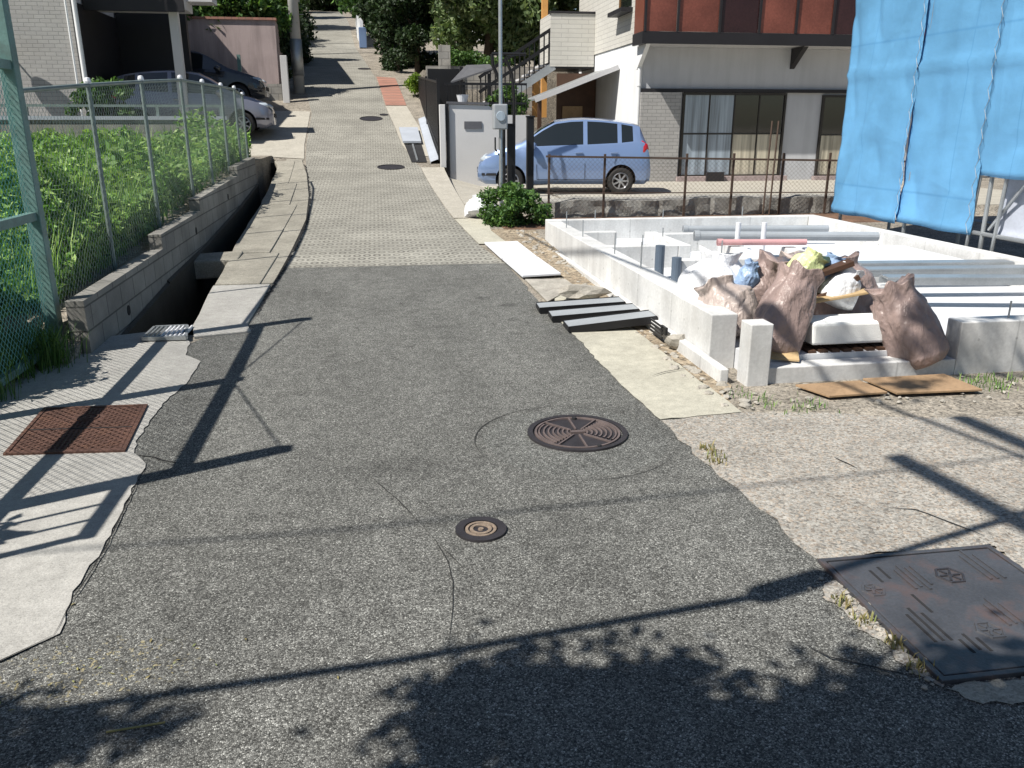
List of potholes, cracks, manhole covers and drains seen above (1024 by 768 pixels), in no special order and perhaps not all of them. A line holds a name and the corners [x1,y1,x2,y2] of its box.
crack [369,475,465,639]
utility cover [818,544,1024,685]
drain grate [141,324,193,341]
manhole cover [455,516,507,543]
crack [806,644,916,678]
crack [900,508,982,535]
manhole cover [527,414,628,452]
